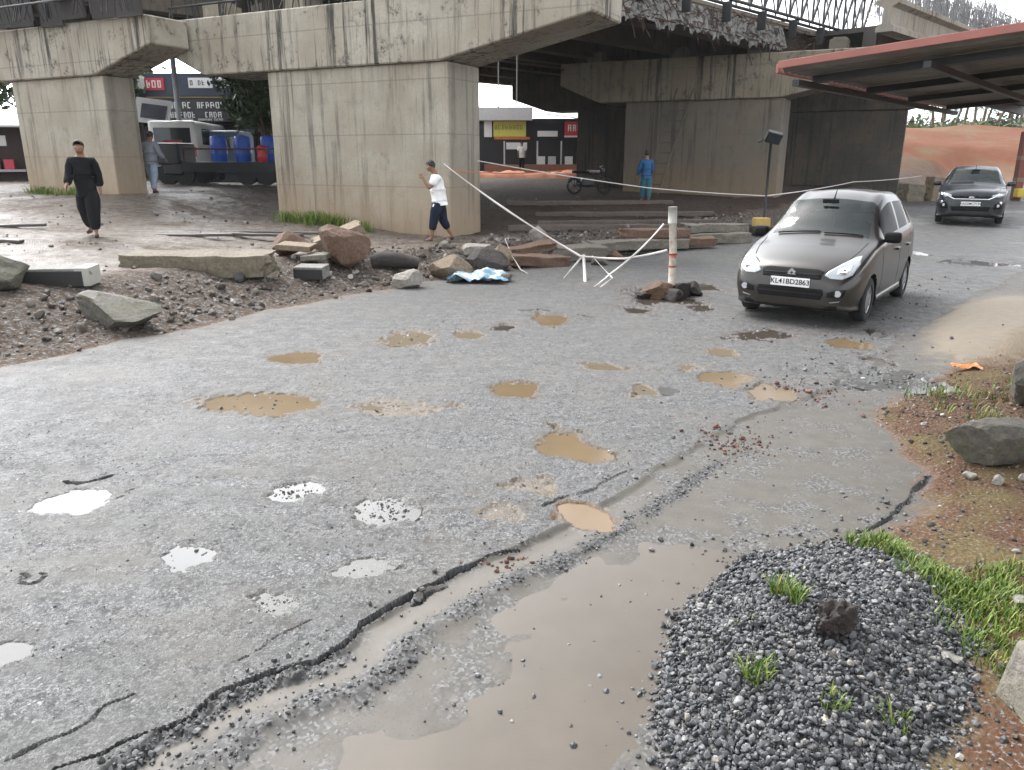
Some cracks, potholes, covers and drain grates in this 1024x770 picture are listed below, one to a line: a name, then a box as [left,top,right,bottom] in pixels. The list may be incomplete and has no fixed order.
pothole [191,391,326,418]
pothole [0,639,40,668]
pothole [743,381,804,404]
pothole [344,397,467,417]
pothole [531,420,626,466]
crack [540,470,628,507]
crack [857,476,934,534]
pothole [265,350,325,364]
crack [4,548,520,770]
pothole [373,327,440,348]
pothole [265,475,332,503]
pothole [550,498,622,534]
